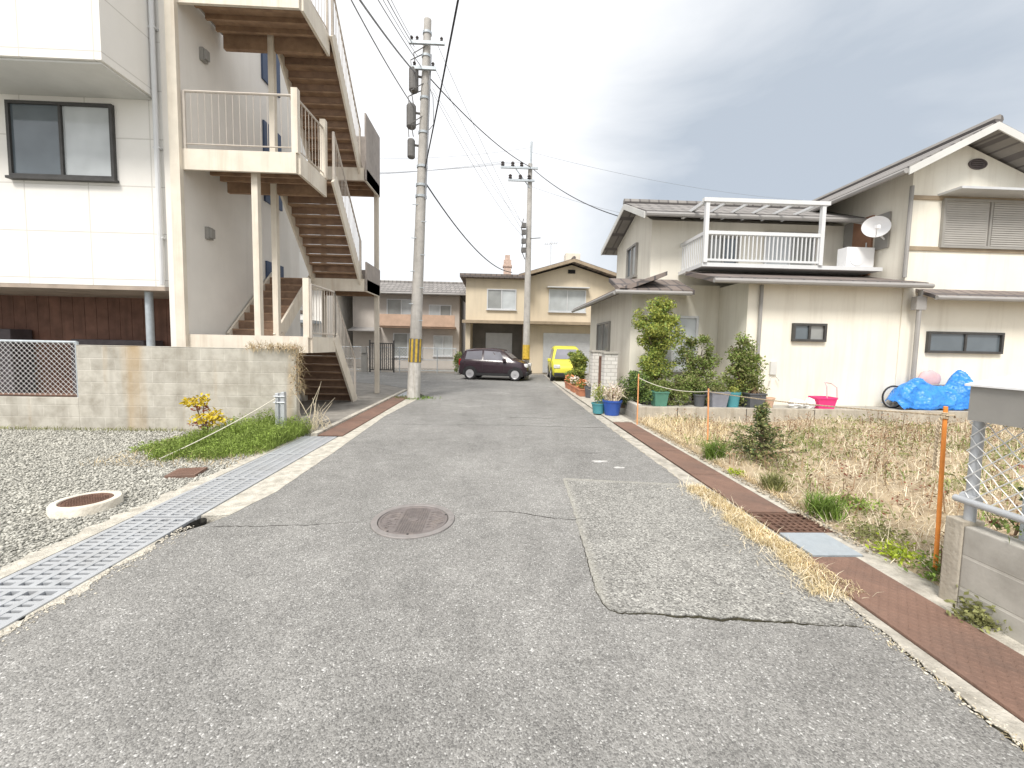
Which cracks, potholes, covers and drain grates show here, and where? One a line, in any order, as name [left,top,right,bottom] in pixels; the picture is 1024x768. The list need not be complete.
drain grate [270,436,337,454]
manhole cover [46,490,124,519]
drain grate [0,518,194,590]
drain grate [217,453,307,479]
drain grate [0,589,70,630]
manhole cover [370,503,455,539]
manhole cover [164,467,208,478]
crack [465,511,1024,752]
drain grate [750,513,833,536]
drain grate [133,478,264,520]
